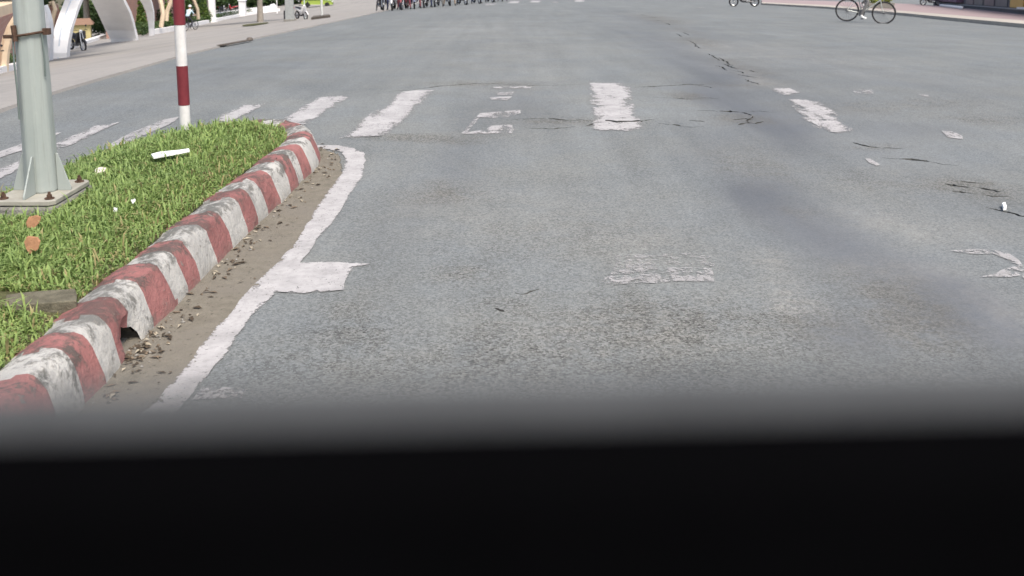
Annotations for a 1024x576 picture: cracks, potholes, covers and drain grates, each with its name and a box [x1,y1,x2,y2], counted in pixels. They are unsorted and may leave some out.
crack [852,142,1024,217]
crack [529,84,765,129]
